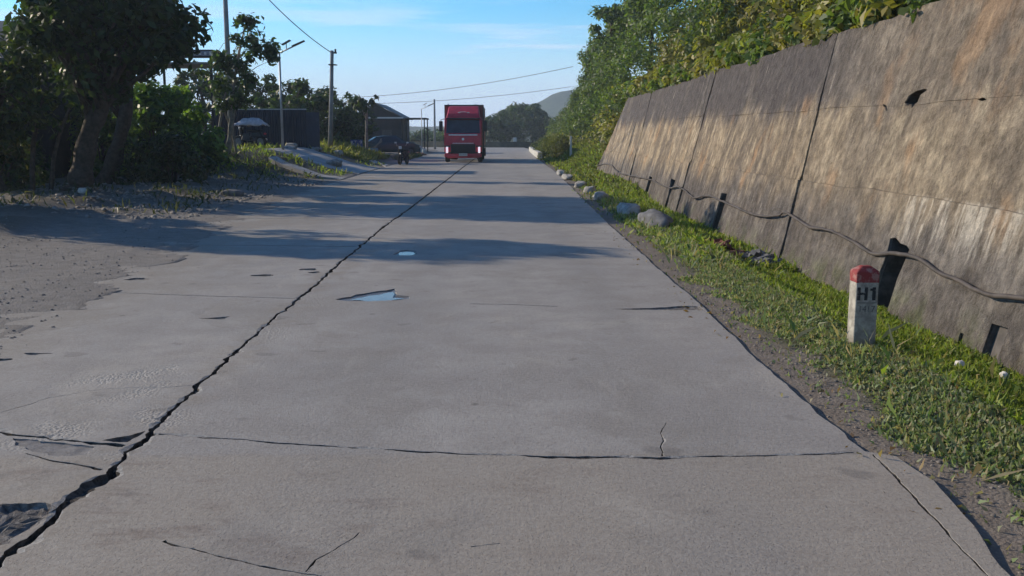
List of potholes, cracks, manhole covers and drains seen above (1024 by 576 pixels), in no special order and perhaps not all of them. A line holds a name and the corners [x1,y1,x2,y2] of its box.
crack [0,158,853,576]
pothole [336,289,410,301]
pothole [0,502,56,545]
